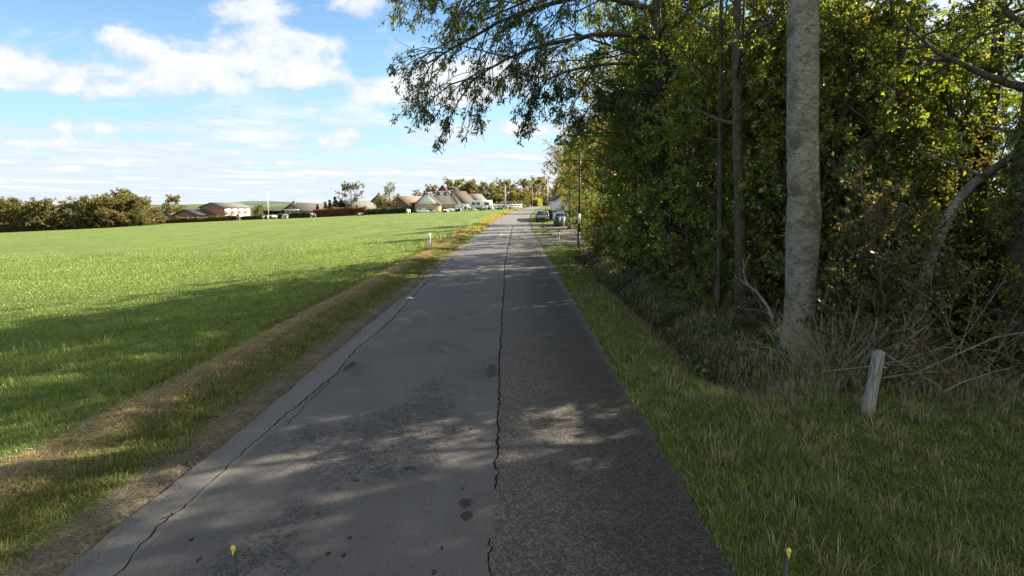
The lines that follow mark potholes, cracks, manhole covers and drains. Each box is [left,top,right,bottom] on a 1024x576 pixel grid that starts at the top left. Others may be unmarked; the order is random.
pothole [459,498,471,509]
crack [114,242,474,576]
crack [493,226,513,488]
pothole [460,511,473,522]
pothole [486,363,498,378]
